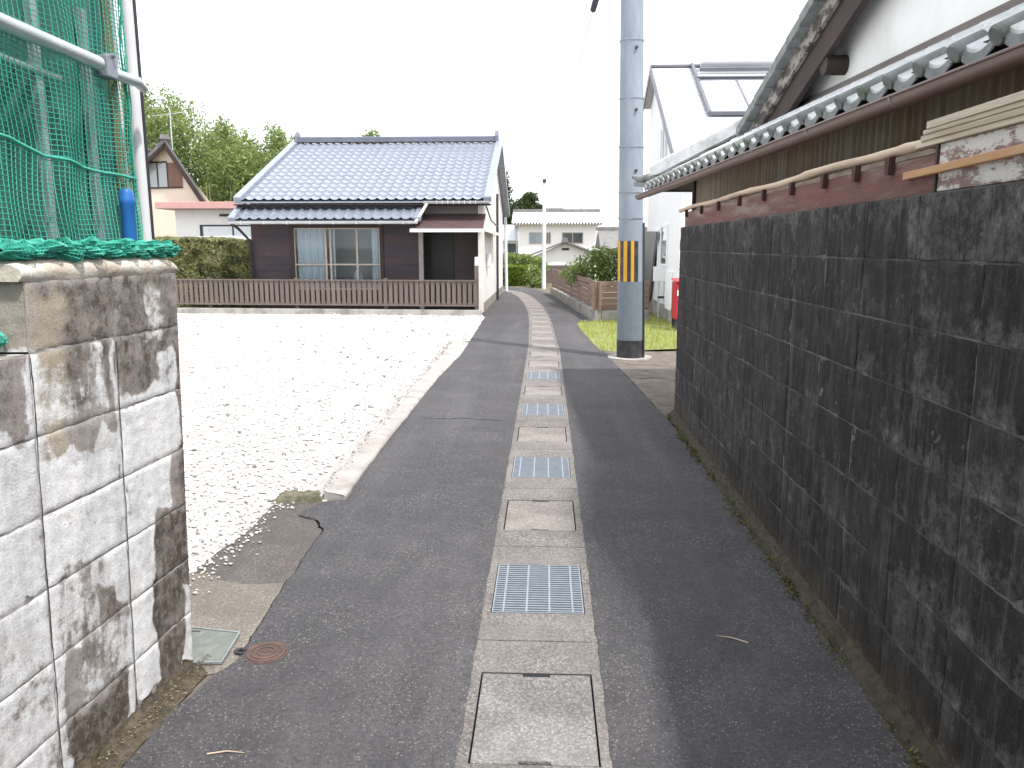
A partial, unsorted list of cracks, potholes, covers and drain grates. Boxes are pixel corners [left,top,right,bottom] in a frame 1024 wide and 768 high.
manhole cover [234,641,289,664]
drain grate [521,404,564,415]
crack [299,514,324,536]
drain grate [512,457,570,478]
utility cover [191,626,241,665]
drain grate [492,564,584,614]
